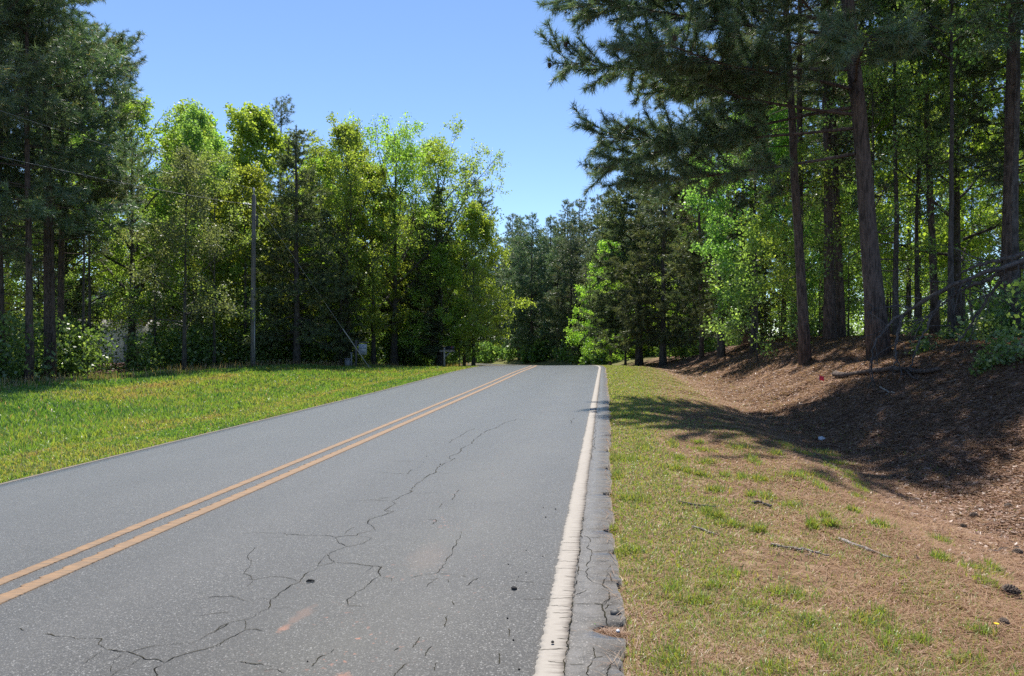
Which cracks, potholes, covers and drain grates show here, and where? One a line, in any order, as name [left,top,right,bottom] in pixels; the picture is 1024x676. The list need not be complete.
crack [21,419,516,676]
crack [540,528,612,675]
